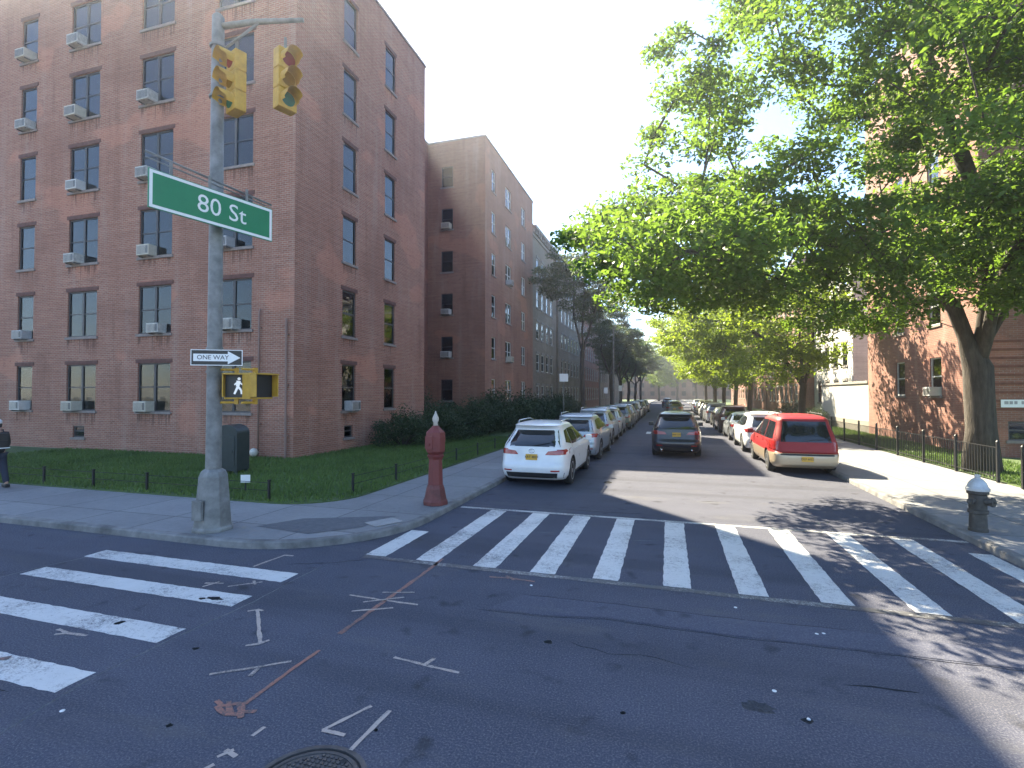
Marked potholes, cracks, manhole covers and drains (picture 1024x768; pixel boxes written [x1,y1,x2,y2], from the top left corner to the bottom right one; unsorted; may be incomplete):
crack [481,594,1023,671]
manhole cover [263,745,367,768]
crack [849,685,919,693]
